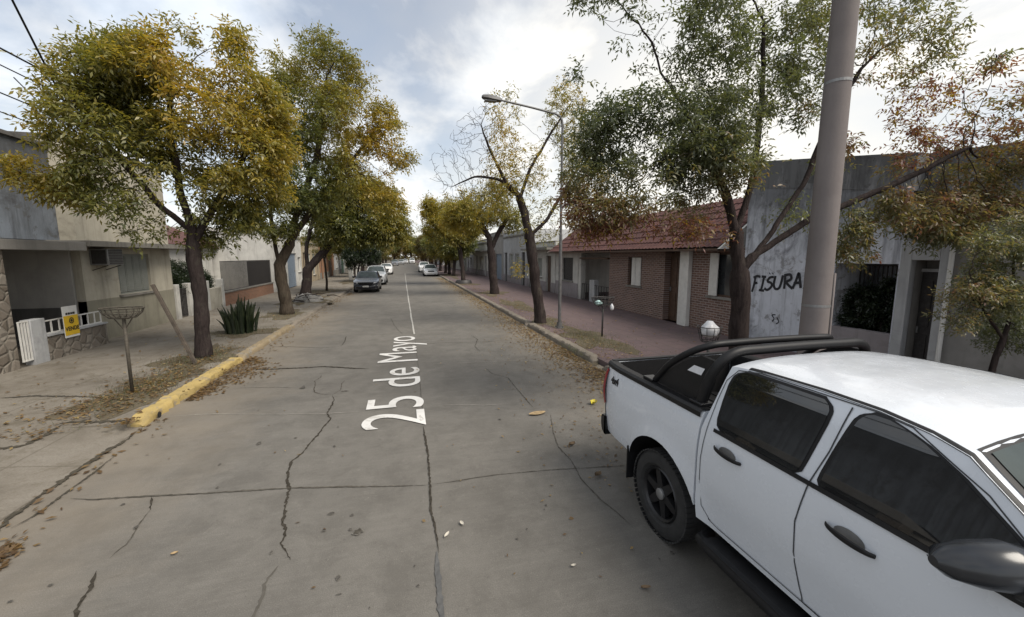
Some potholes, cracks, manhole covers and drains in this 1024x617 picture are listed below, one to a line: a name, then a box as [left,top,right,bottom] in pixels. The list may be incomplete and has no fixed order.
crack [251,377,343,617]
crack [551,421,624,519]
crack [0,424,153,617]
